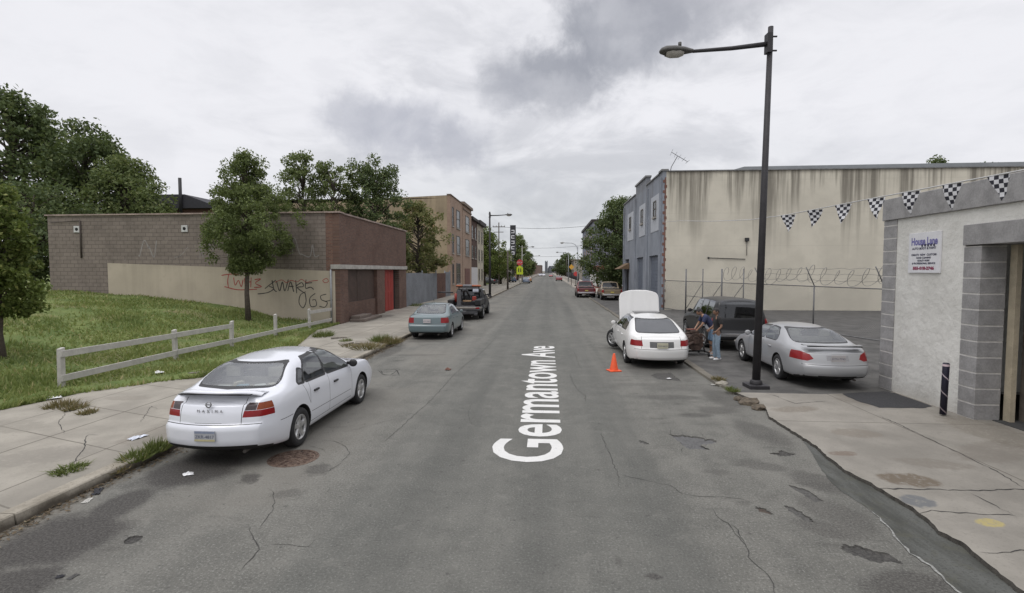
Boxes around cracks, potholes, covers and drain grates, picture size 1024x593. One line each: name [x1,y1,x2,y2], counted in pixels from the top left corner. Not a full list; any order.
crack [240,490,313,571]
manhole cover [267,449,319,467]
pothole [124,535,143,544]
pothole [669,434,716,450]
crack [601,435,774,590]
pothole [784,505,814,522]
pothole [841,544,903,564]
pothole [789,485,823,503]
